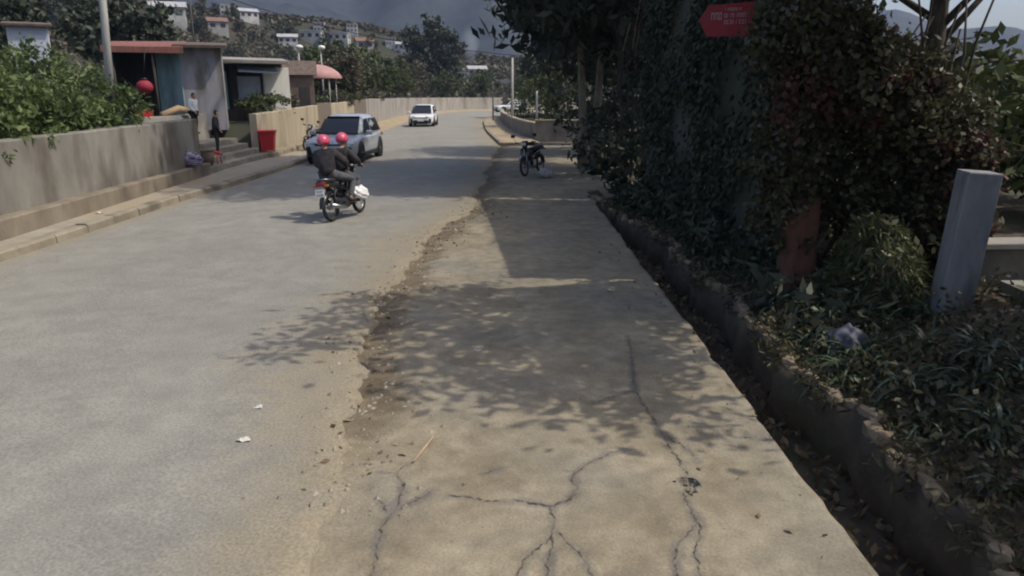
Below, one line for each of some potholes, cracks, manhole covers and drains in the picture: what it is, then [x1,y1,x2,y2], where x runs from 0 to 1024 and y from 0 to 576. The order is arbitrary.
pothole [674,477,701,496]
crack [453,449,621,576]
crack [594,340,702,576]
crack [370,464,429,576]
